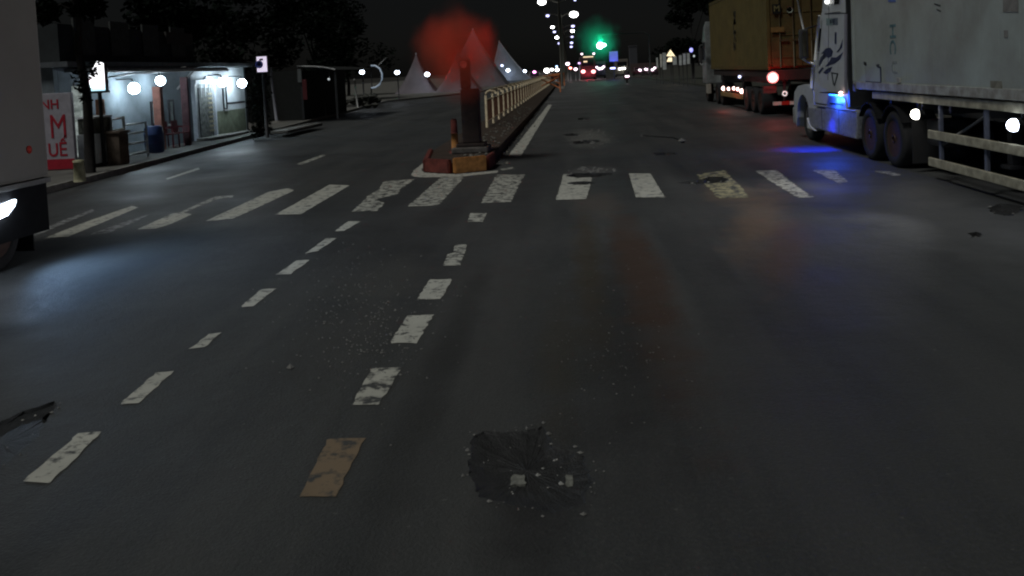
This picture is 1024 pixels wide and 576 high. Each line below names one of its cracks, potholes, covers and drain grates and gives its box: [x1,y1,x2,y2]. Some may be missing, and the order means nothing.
pothole [988,203,1024,216]
pothole [0,401,62,469]
pothole [461,421,605,517]
pothole [678,175,730,185]
